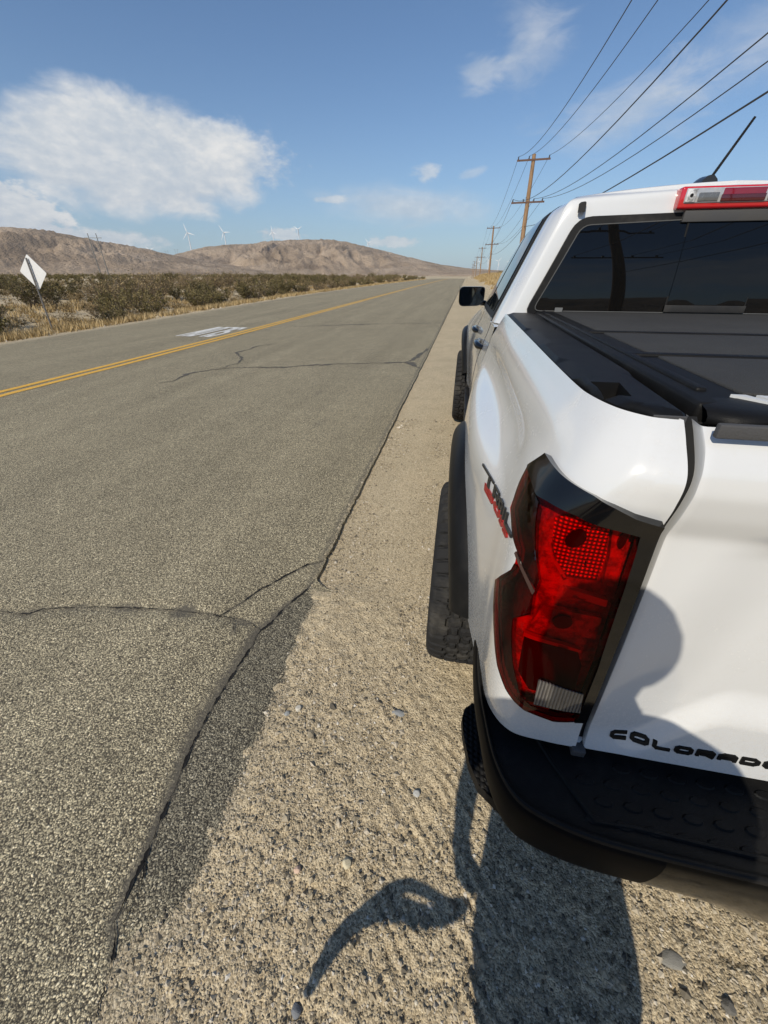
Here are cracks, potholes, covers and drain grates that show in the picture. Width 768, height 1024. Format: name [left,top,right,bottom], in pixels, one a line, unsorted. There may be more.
crack [162,332,429,383]
crack [3,561,323,1018]
